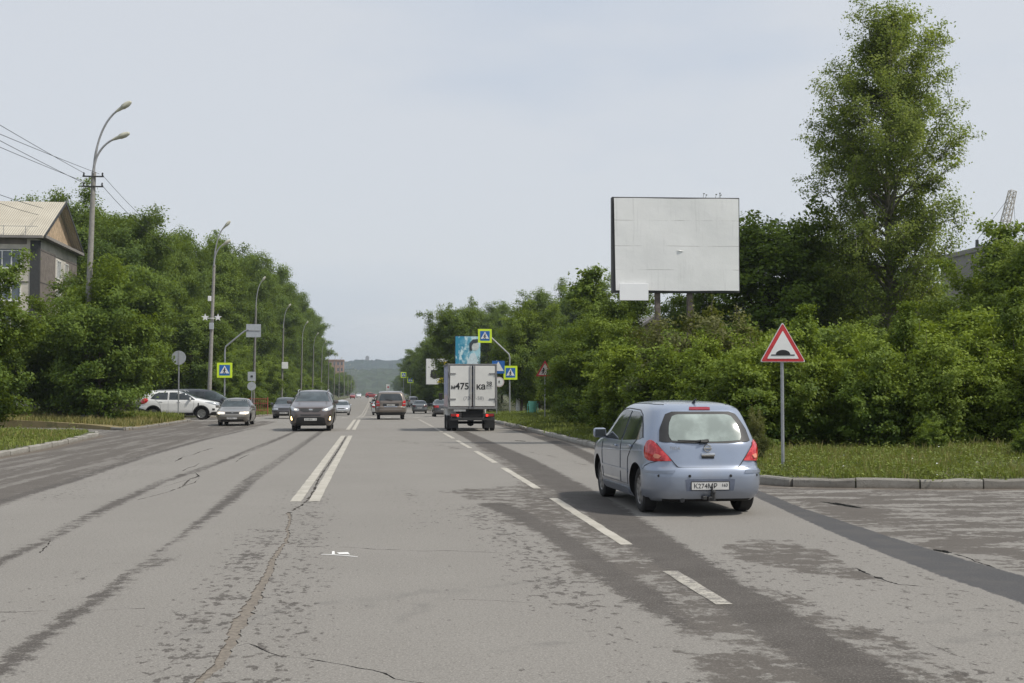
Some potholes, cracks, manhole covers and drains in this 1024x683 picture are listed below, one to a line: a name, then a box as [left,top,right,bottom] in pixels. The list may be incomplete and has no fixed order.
crack [194,438,421,683]
crack [138,448,212,500]
crack [856,568,916,586]
